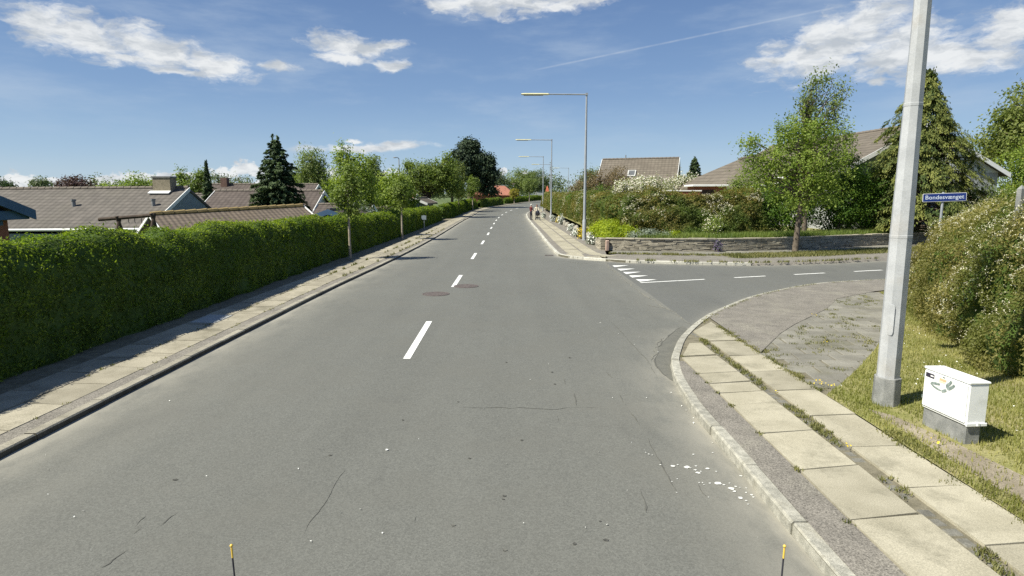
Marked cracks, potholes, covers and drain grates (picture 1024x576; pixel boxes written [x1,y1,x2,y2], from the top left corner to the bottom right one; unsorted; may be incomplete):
crack [471,380,593,421]
crack [620,395,676,510]
